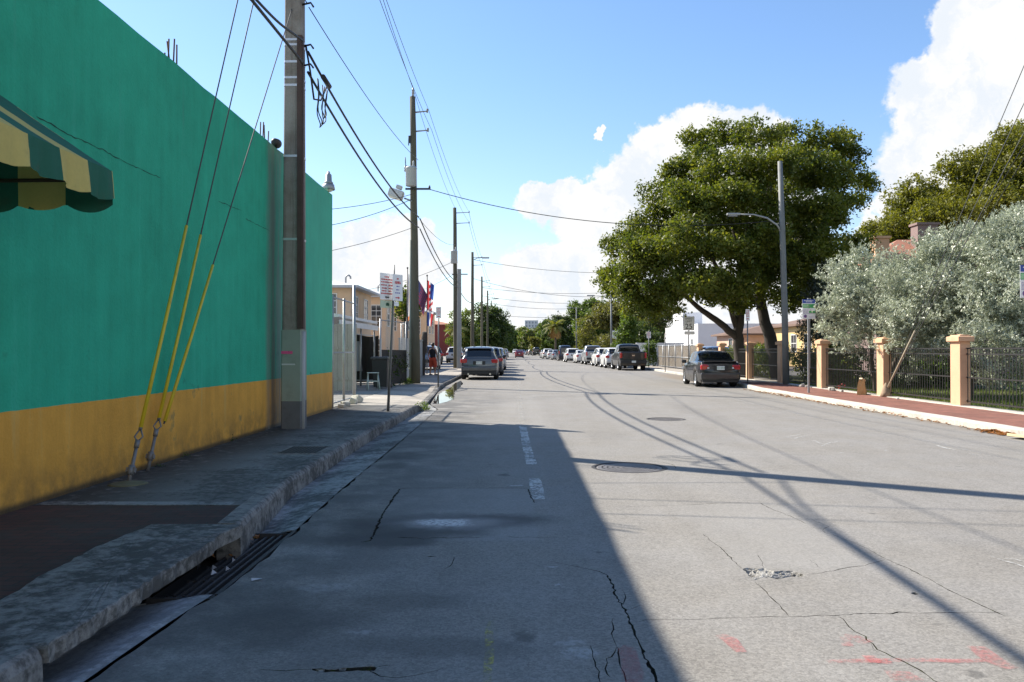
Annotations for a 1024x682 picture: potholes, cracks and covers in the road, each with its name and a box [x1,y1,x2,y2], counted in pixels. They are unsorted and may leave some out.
crack [551,535,1005,682]
manhole cover [591,462,668,473]
crack [262,665,443,678]
utility cover [273,446,333,454]
pothole [743,568,804,580]
